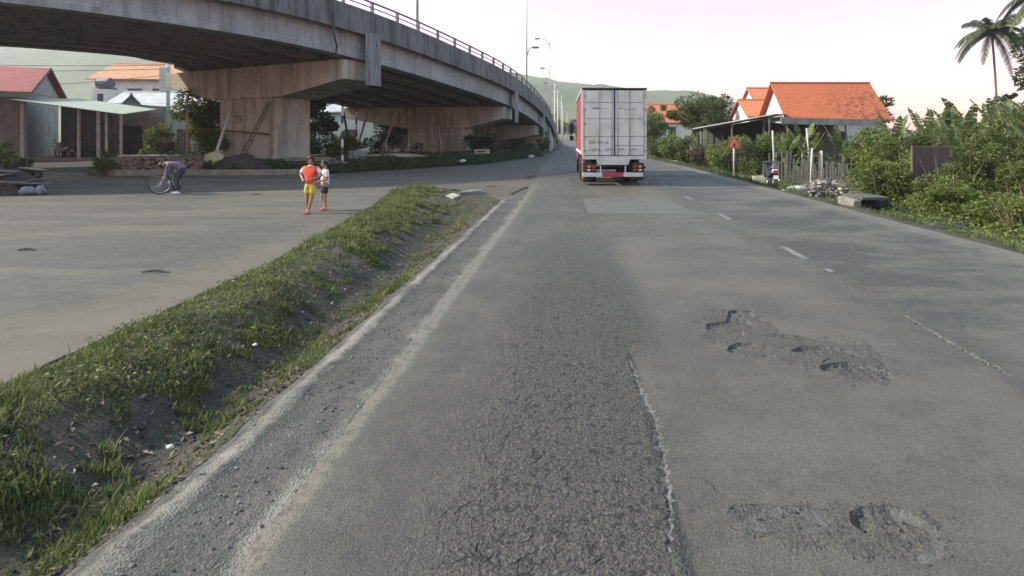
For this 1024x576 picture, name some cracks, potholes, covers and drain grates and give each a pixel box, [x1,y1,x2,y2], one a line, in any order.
pothole [819,362,894,382]
pothole [706,310,758,336]
pothole [727,342,763,355]
pothole [791,346,863,359]
pothole [727,500,844,536]
pothole [849,501,953,566]
